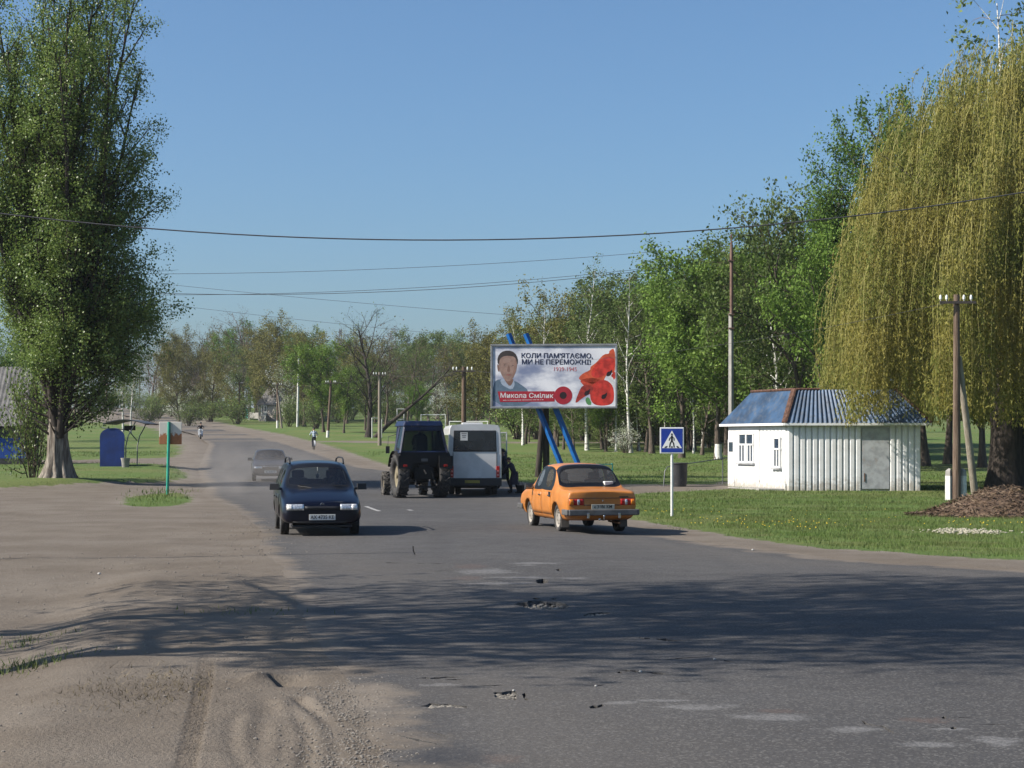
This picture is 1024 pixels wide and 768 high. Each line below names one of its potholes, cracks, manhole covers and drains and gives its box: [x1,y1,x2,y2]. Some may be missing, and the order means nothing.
pothole [516,600,569,610]
pothole [494,691,518,700]
